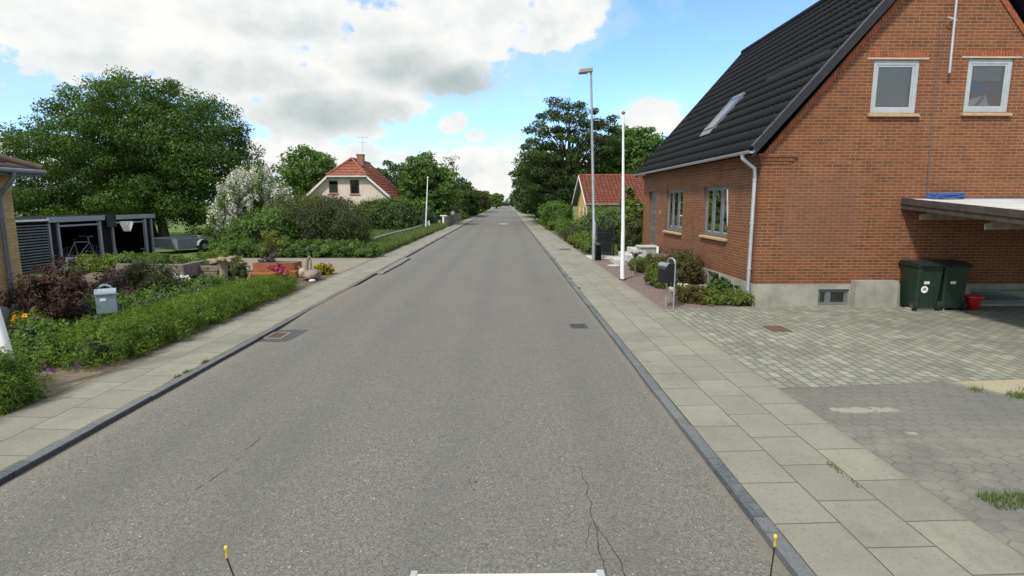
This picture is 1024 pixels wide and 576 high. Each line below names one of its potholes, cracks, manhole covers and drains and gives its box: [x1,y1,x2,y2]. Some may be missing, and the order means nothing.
crack [580,467,626,576]
